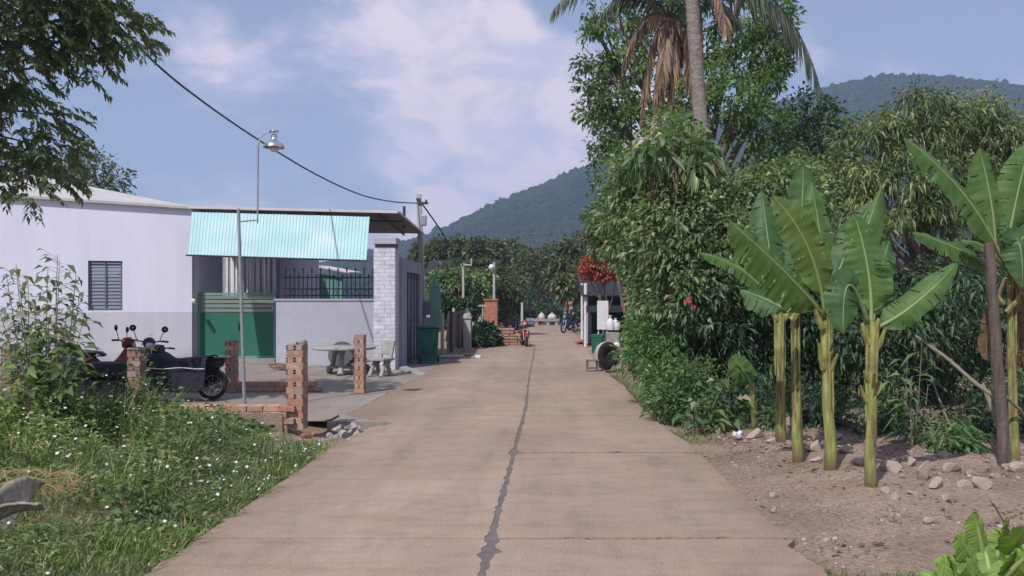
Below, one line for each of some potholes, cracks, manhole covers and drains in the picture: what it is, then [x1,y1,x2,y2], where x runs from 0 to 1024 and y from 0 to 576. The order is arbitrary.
crack [477,348,535,576]
